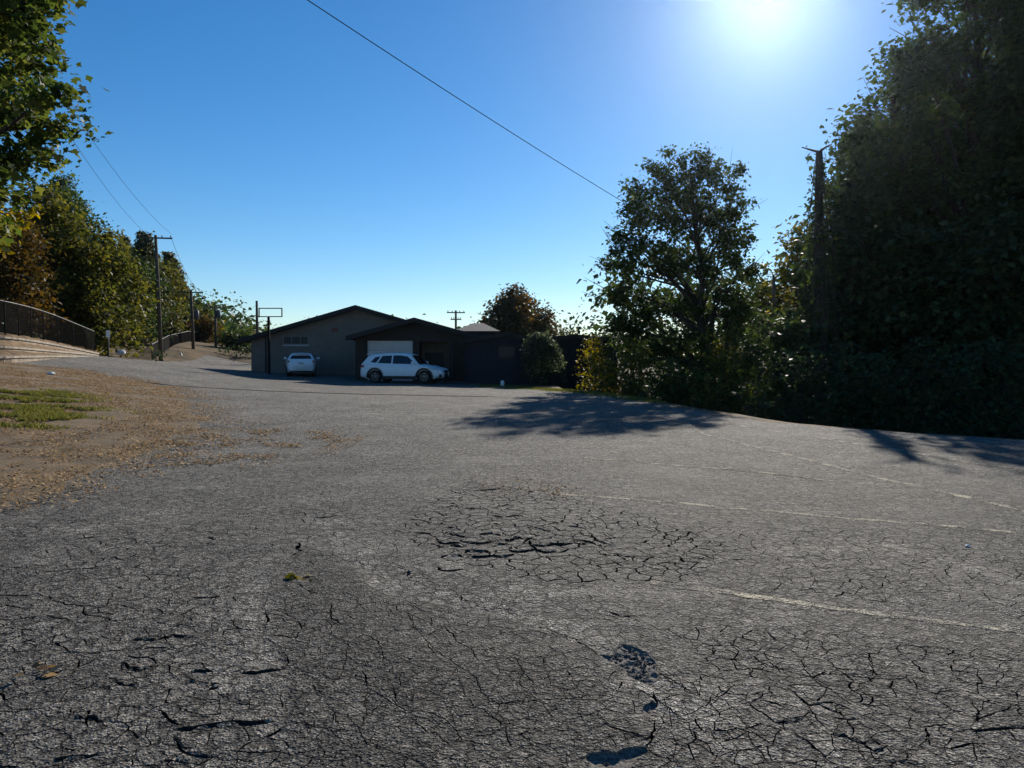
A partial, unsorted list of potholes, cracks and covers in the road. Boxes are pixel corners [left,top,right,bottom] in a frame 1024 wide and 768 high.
pothole [586,746,648,768]
pothole [640,701,656,717]
crack [0,494,1024,768]
pothole [599,644,658,687]
